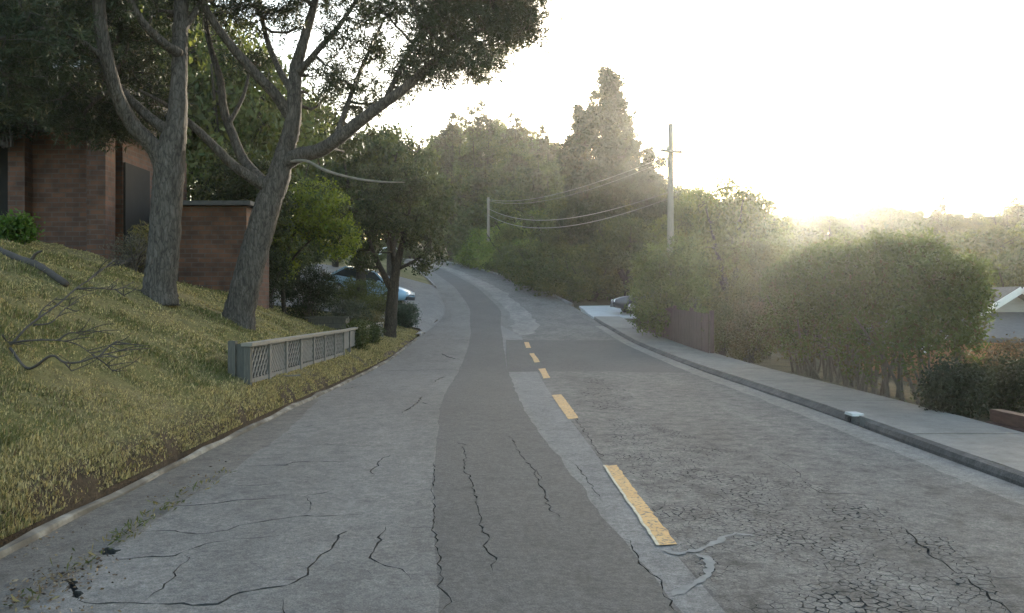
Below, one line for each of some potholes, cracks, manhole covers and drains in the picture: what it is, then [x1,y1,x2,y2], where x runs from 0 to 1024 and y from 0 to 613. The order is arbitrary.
crack [511,437,560,518]
crack [459,443,497,571]
crack [367,527,410,577]
pothole [64,578,84,600]
crack [605,418,1017,613]
crack [79,491,358,613]
crack [182,461,336,506]
